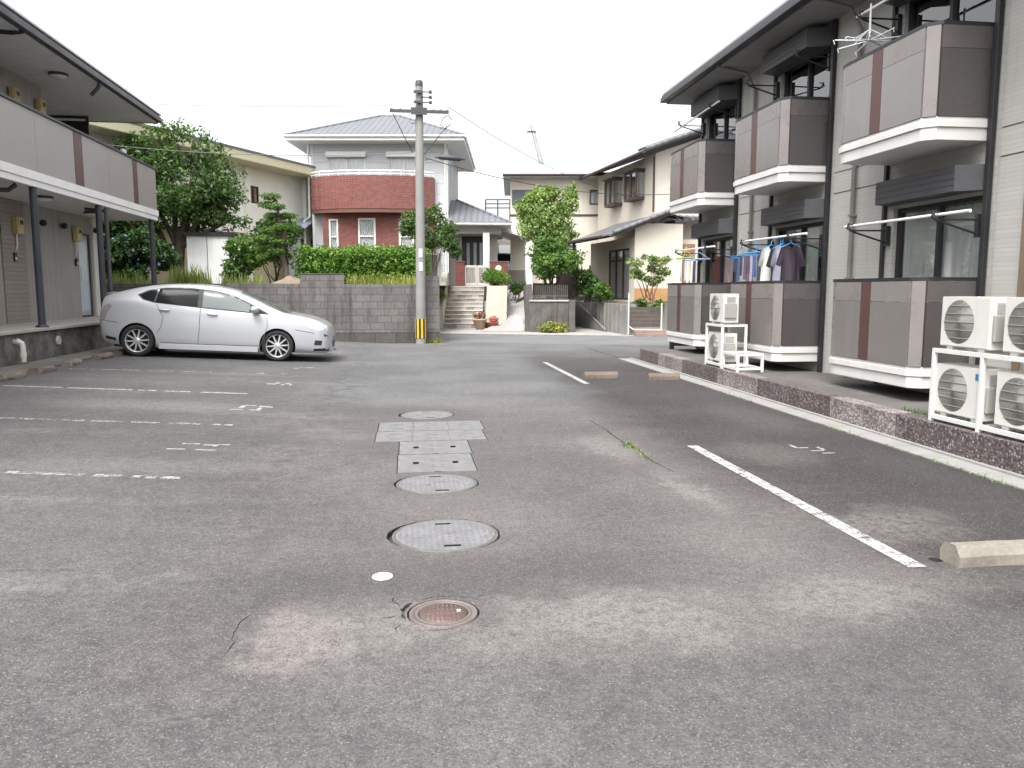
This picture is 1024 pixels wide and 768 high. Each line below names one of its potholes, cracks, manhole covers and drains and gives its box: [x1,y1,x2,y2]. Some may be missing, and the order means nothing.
manhole cover [377,421,485,432]
manhole cover [407,599,480,628]
manhole cover [374,429,488,442]
manhole cover [399,411,455,419]
manhole cover [394,474,479,494]
manhole cover [396,453,478,473]
crack [386,594,497,632]
manhole cover [387,519,500,553]
crack [223,614,251,658]
manhole cover [398,440,473,455]
crack [588,419,673,472]
